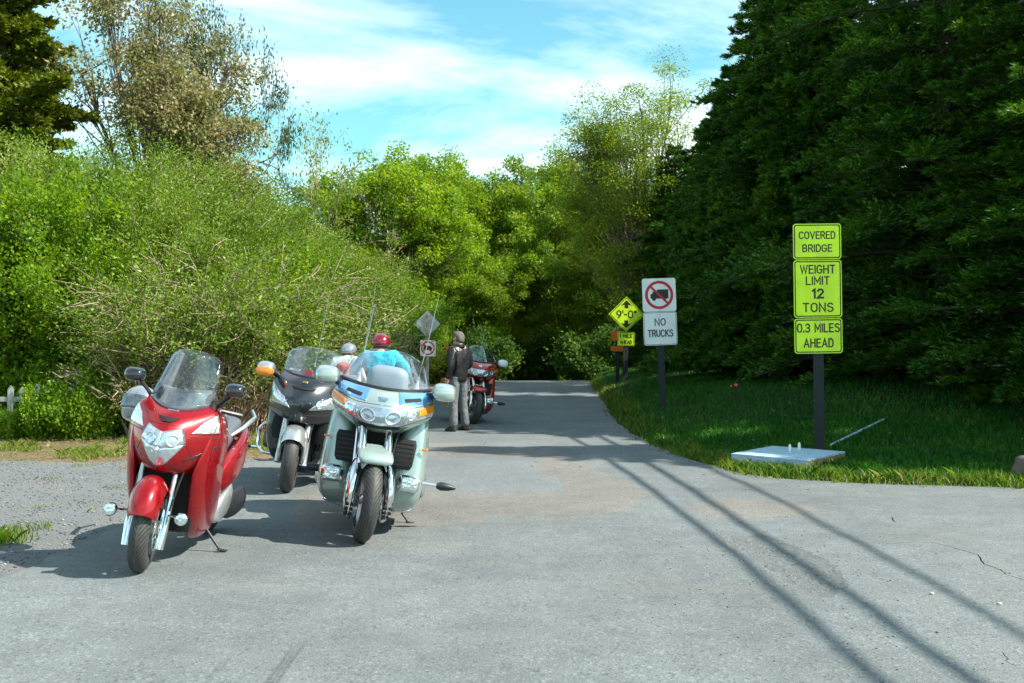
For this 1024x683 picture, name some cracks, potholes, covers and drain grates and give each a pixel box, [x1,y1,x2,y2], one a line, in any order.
crack [889,542,1023,580]
